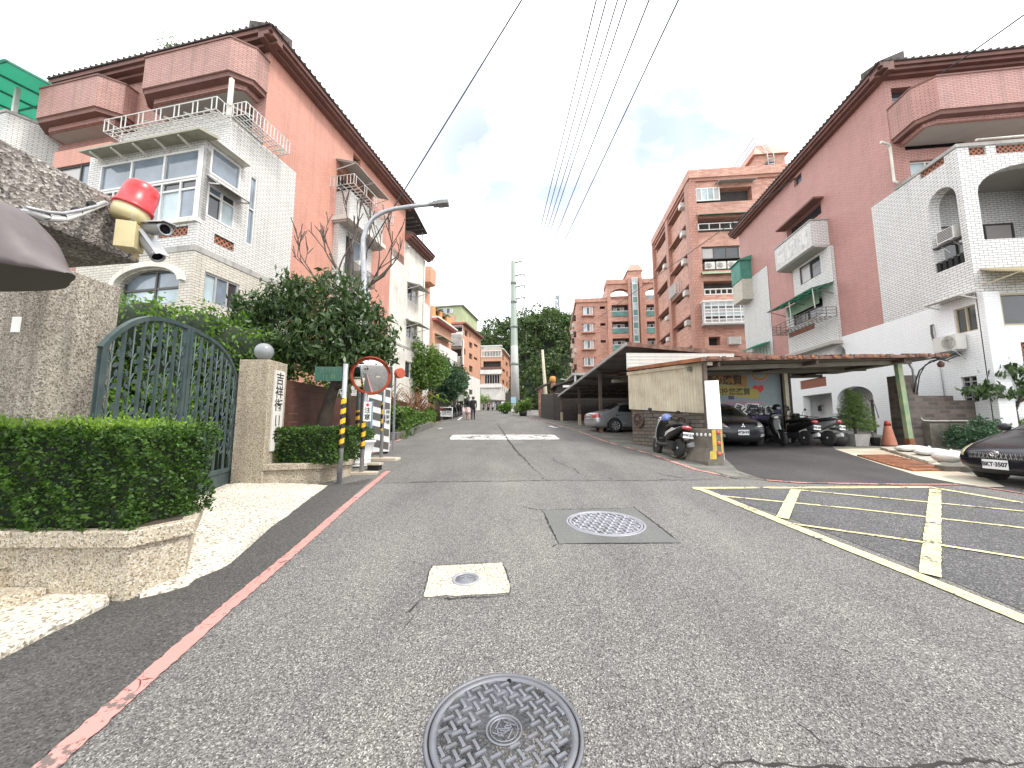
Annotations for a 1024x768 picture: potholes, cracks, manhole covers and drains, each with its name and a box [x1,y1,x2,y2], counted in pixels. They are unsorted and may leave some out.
manhole cover [423,673,585,768]
crack [402,560,511,627]
manhole cover [566,511,647,537]
crack [498,425,613,480]
manhole cover [424,563,510,597]
